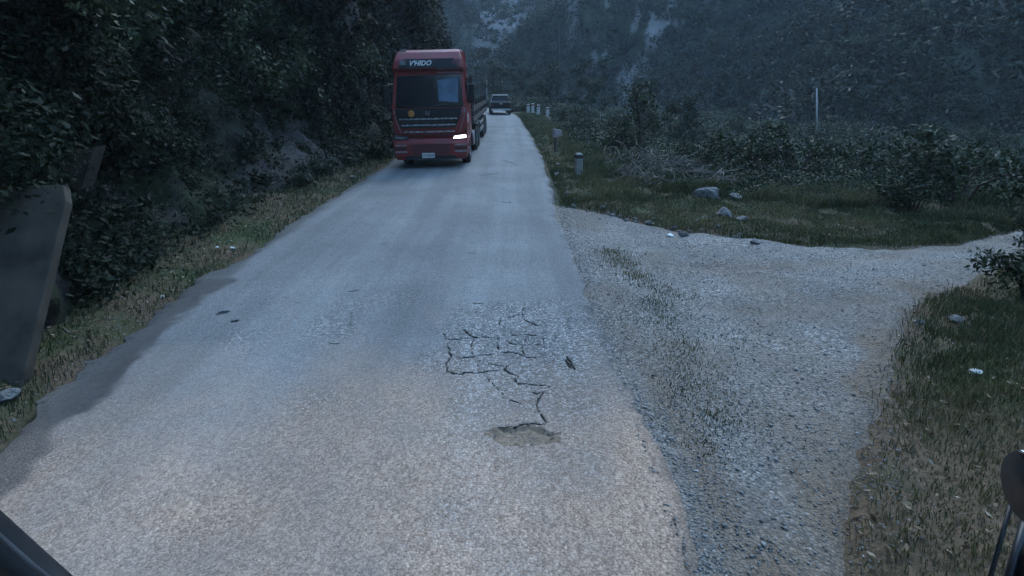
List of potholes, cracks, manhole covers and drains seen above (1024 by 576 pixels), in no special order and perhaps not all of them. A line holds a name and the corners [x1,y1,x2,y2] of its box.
crack [443,303,549,429]
pothole [483,425,562,447]
